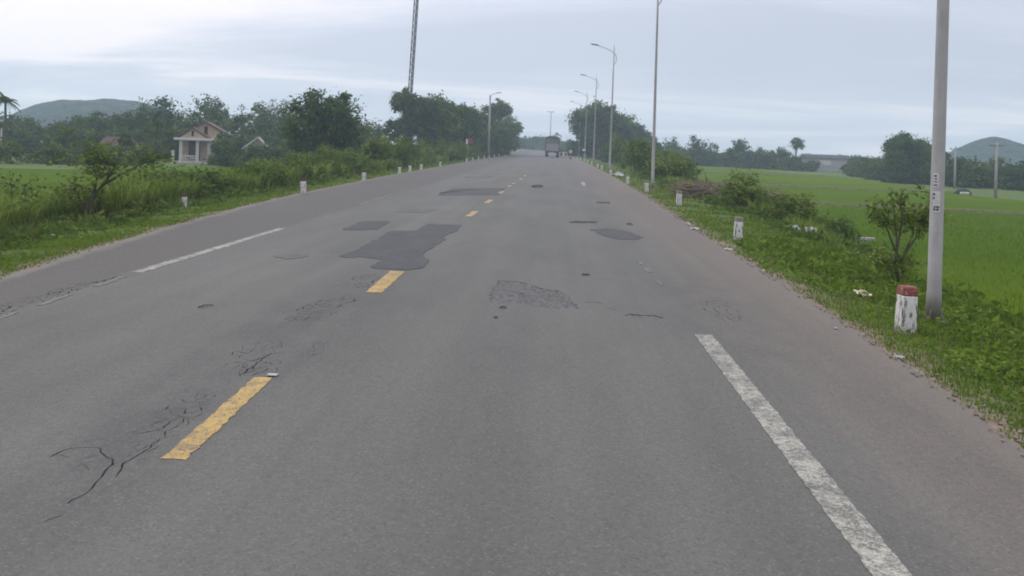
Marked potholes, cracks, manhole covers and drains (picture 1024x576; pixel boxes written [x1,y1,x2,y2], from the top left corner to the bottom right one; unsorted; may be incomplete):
pothole [489,280,578,309]
crack [44,388,215,522]
crack [281,274,380,323]
crack [225,342,329,376]
